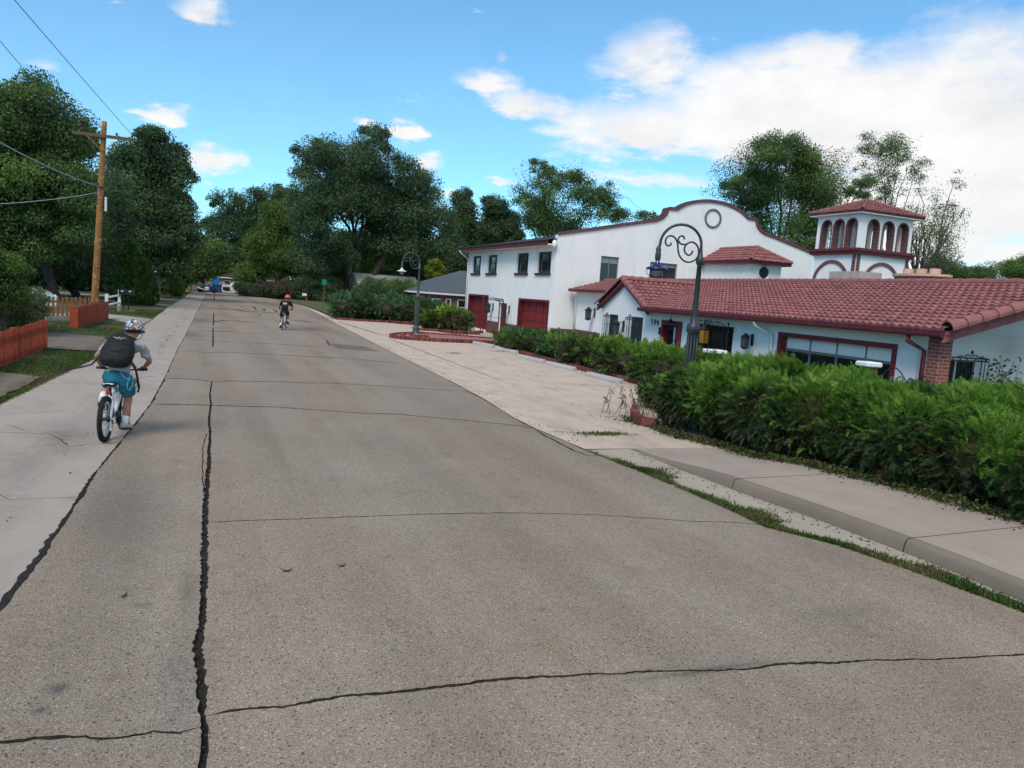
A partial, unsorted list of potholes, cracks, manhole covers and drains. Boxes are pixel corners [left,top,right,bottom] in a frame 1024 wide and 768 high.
crack [0,295,1024,768]
